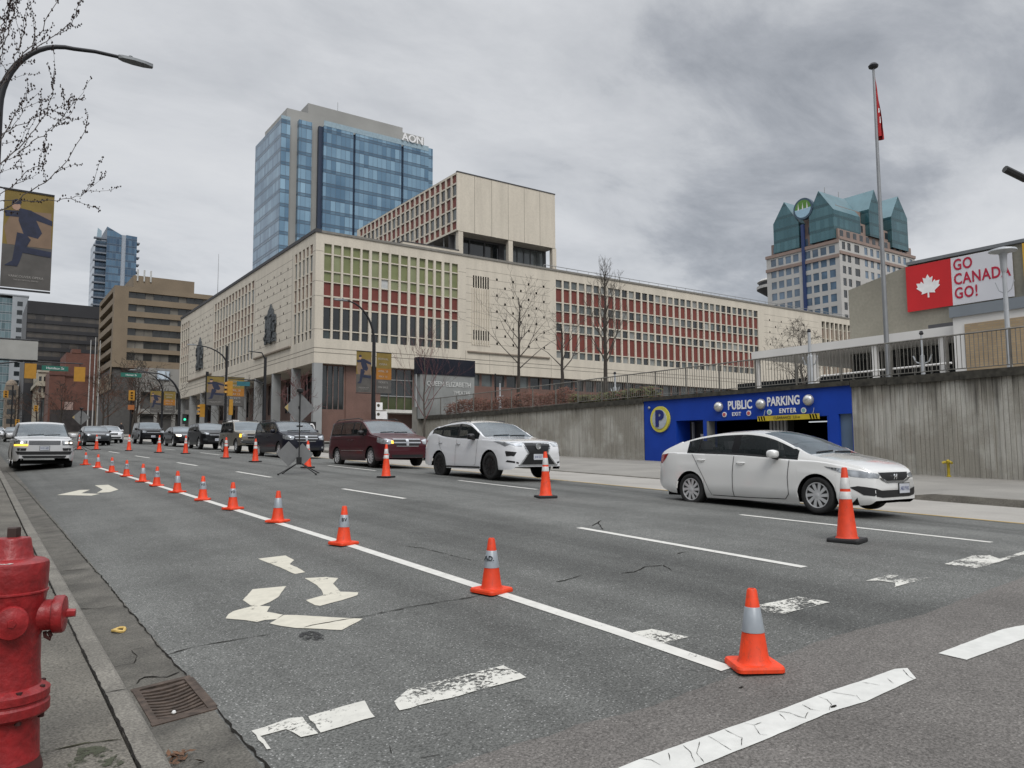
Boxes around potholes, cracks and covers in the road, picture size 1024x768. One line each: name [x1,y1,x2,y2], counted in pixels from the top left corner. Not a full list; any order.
drain grate [130,675,218,727]
crack [114,647,180,684]
